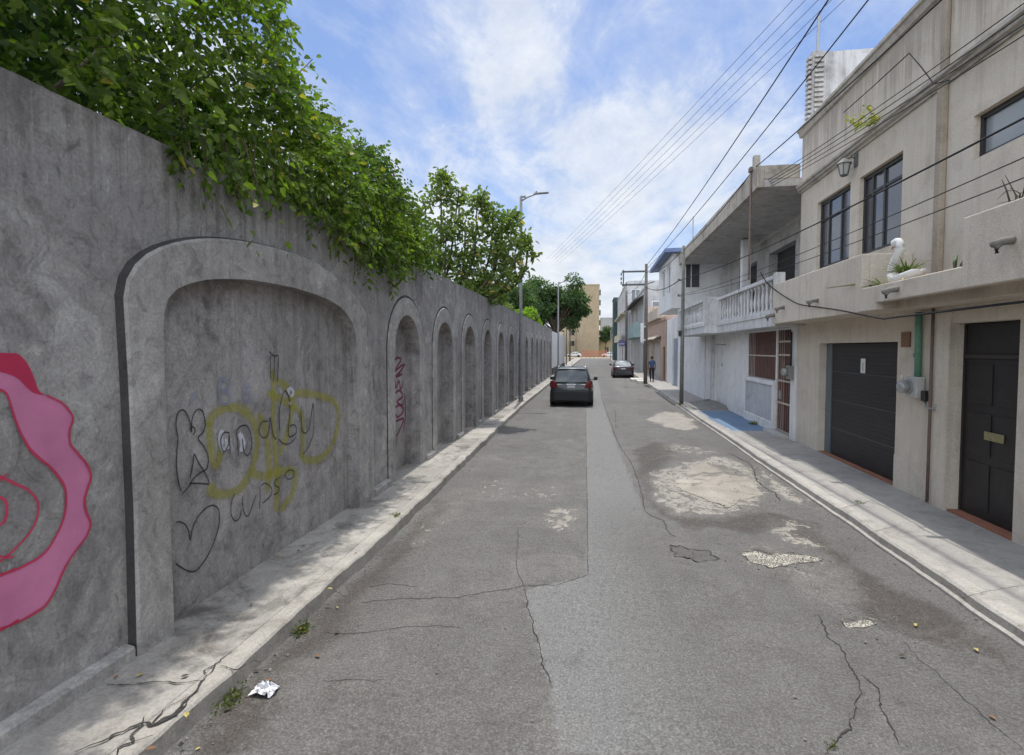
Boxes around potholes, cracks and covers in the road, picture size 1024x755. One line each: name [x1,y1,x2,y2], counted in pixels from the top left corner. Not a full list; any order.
crack [817,614,899,755]
crack [361,531,586,686]
crack [328,625,460,634]
pothole [738,549,824,569]
crack [901,639,1024,752]
pothole [841,616,877,628]
